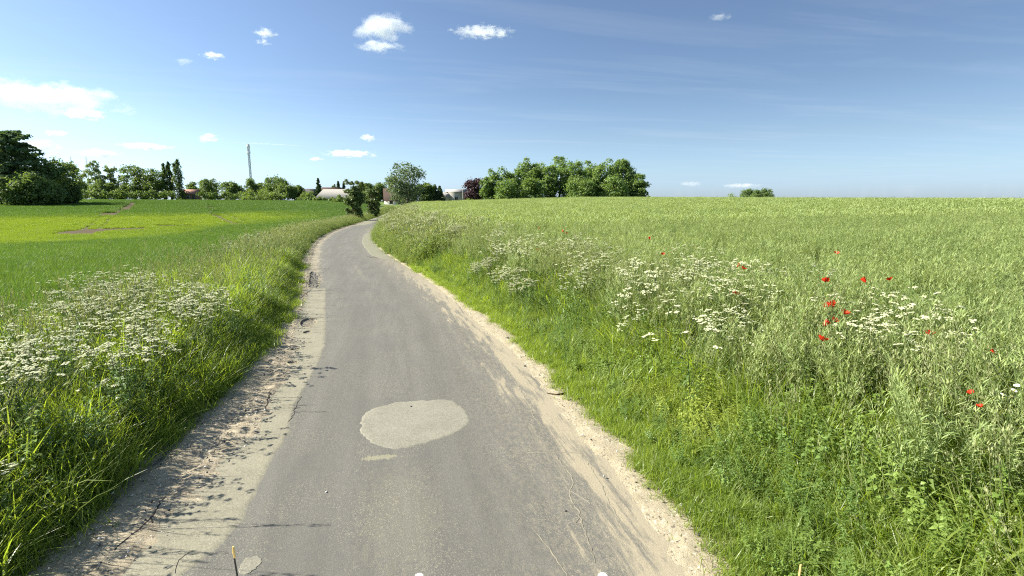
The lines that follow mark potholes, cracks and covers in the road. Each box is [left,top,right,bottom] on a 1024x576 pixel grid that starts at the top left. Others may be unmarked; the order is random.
pothole [299,318,318,328]
pothole [307,271,321,289]
crack [523,451,620,561]
